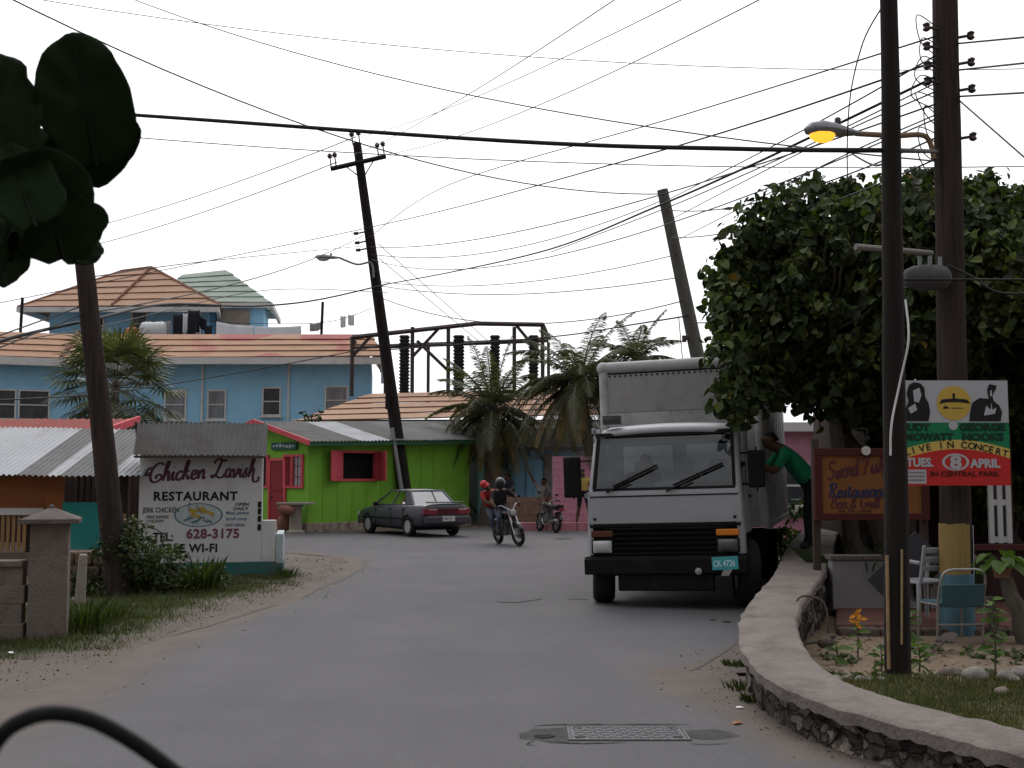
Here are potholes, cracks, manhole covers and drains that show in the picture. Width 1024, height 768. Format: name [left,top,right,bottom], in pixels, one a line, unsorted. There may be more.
manhole cover [565,725,692,741]
